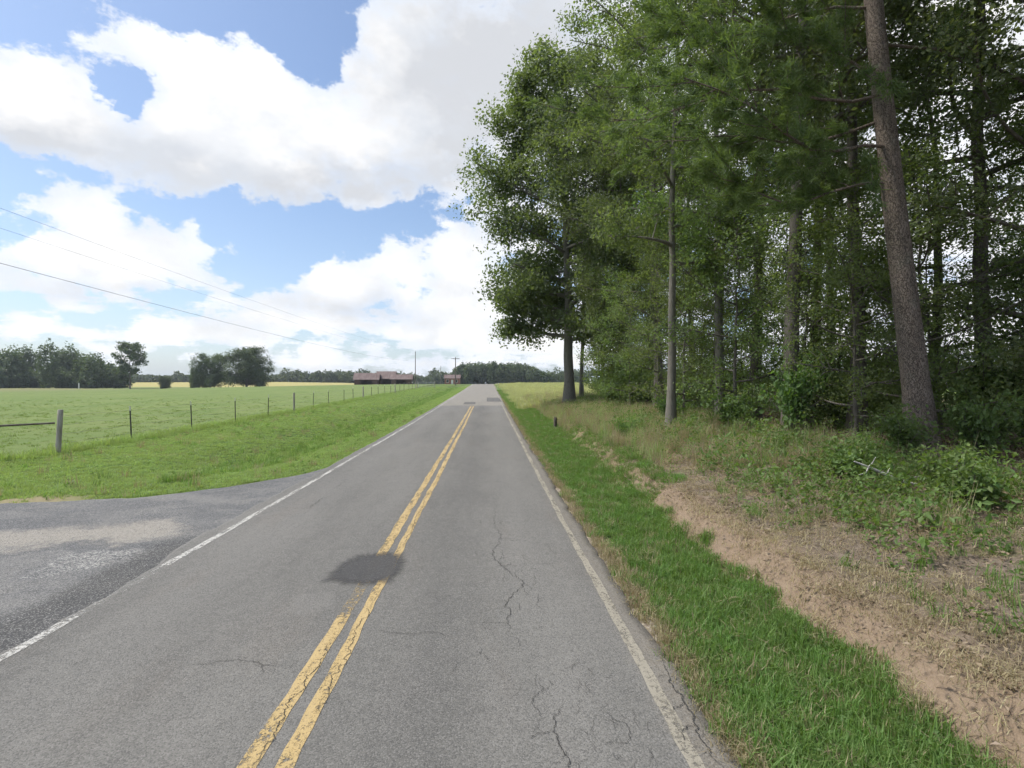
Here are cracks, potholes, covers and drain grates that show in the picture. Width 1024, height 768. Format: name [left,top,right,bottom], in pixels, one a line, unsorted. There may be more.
crack [531,660,664,768]
crack [442,503,553,672]
crack [658,660,724,767]
